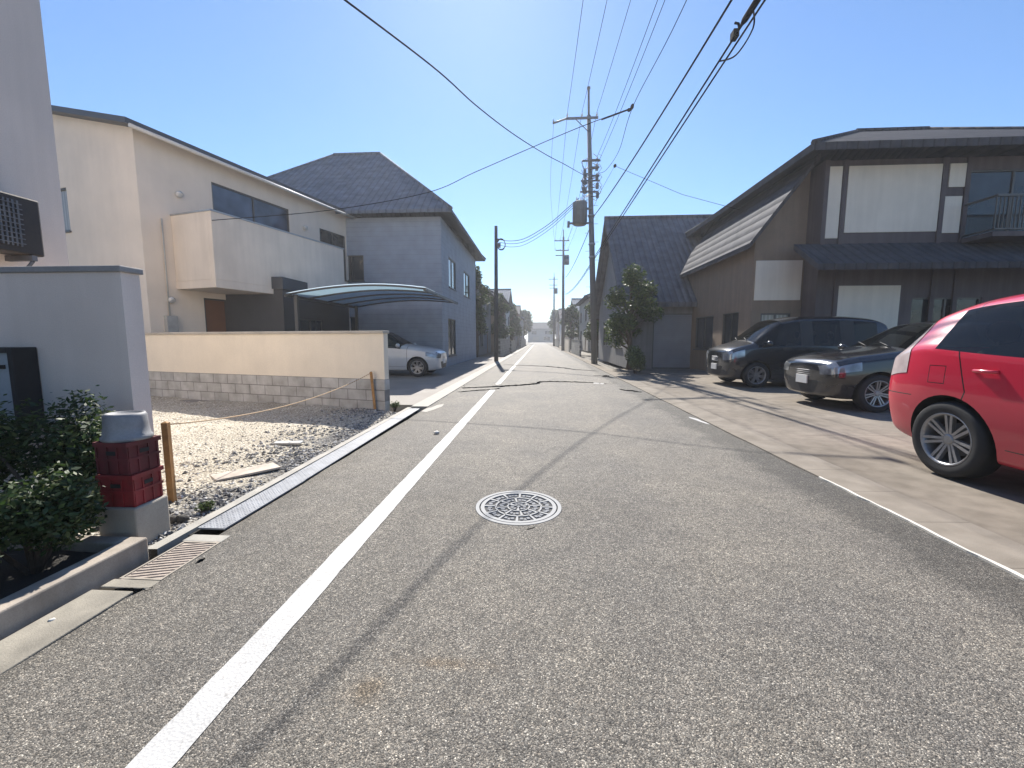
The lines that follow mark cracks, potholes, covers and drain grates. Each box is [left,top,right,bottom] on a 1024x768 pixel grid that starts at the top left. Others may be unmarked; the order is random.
crack [457,364,643,392]
manhole cover [475,491,562,526]
drain grate [119,541,221,581]
